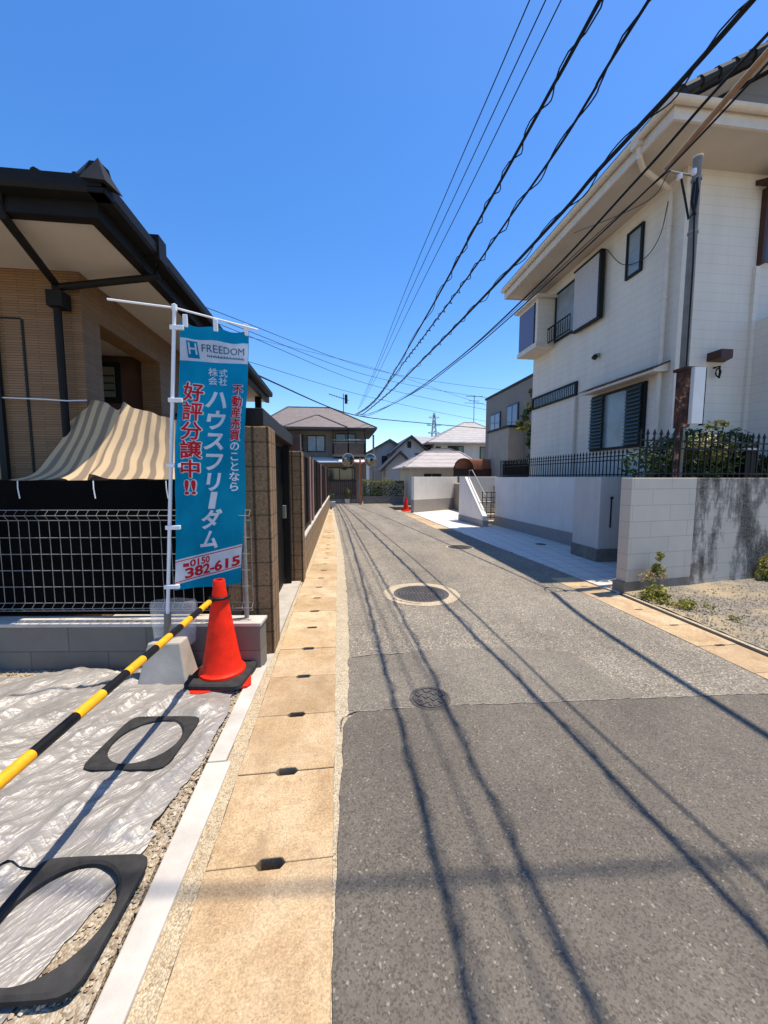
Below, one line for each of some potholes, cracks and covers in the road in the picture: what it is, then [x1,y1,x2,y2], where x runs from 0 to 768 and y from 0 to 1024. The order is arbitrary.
manhole cover [410,686,451,710]
manhole cover [383,583,460,606]
